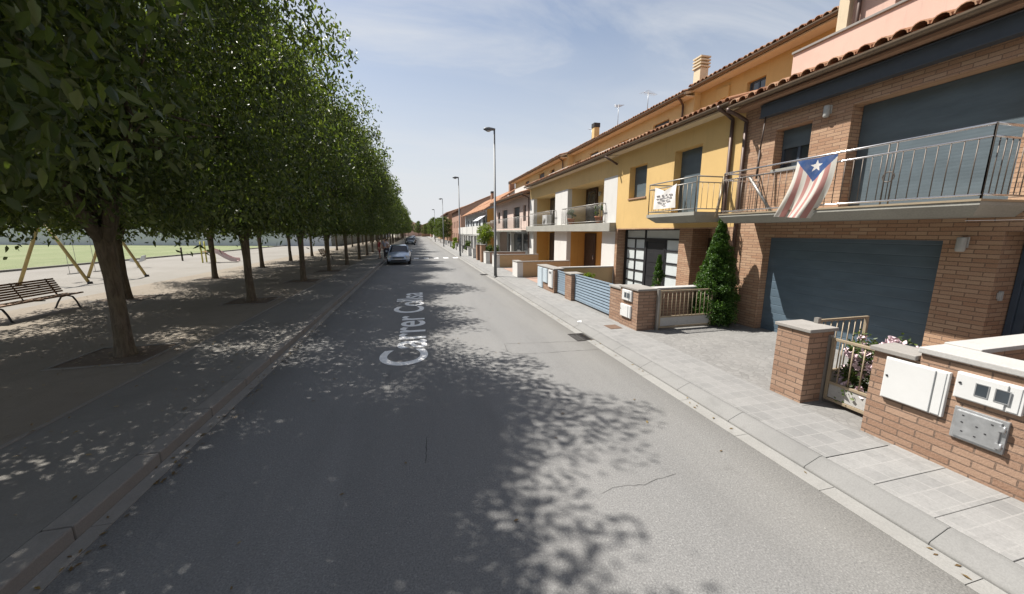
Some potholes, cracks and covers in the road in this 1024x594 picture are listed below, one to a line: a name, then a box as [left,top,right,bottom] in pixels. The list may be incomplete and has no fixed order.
drain grate [568,333,593,341]
